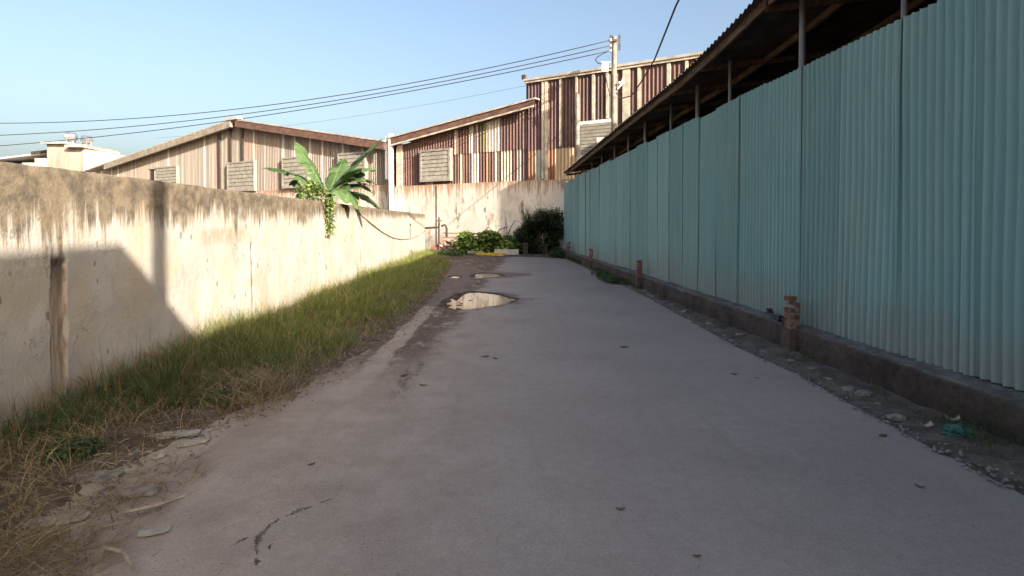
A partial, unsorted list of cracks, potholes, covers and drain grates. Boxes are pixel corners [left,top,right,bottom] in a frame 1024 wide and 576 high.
crack [233,498,333,566]
pothole [437,291,520,310]
